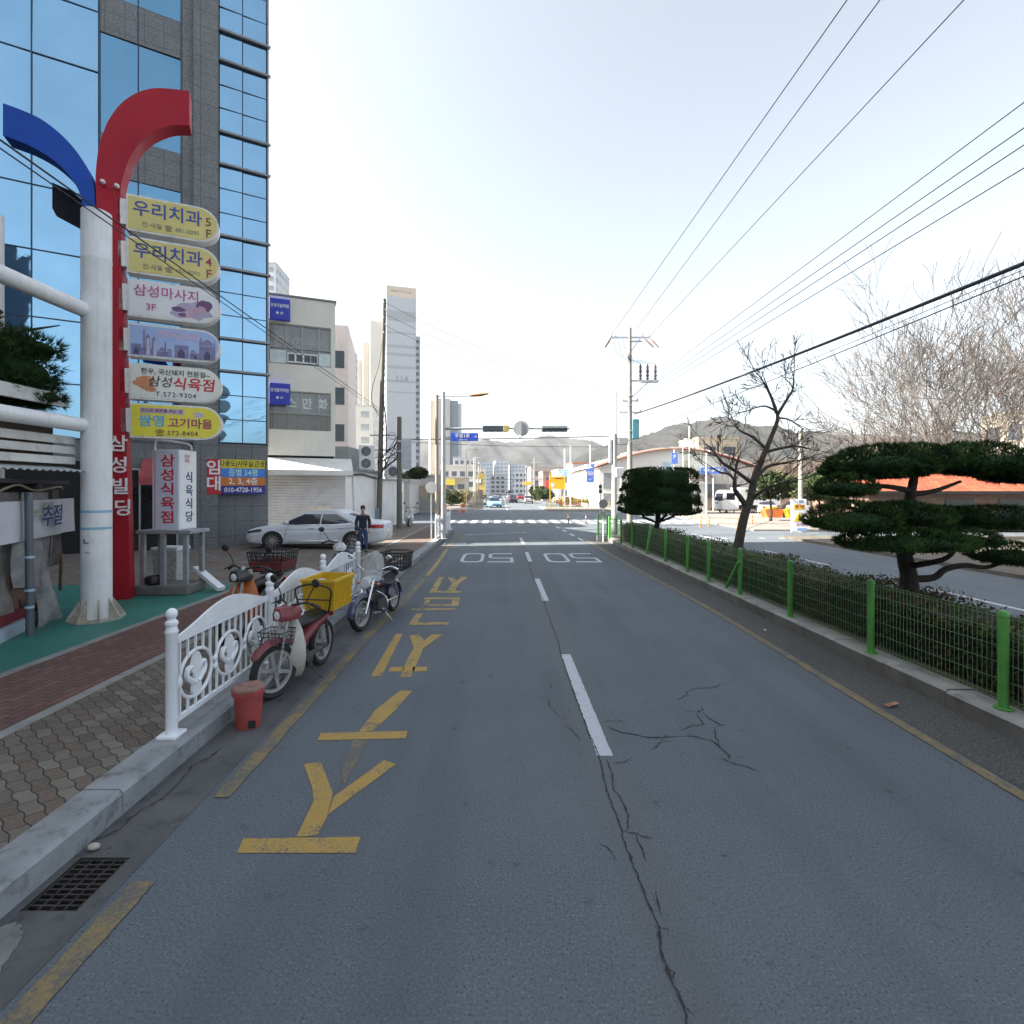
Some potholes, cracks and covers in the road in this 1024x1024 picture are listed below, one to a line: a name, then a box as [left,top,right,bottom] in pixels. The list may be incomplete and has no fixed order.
crack [90,747,222,843]
drain grate [21,858,130,911]
crack [521,537,761,1024]
